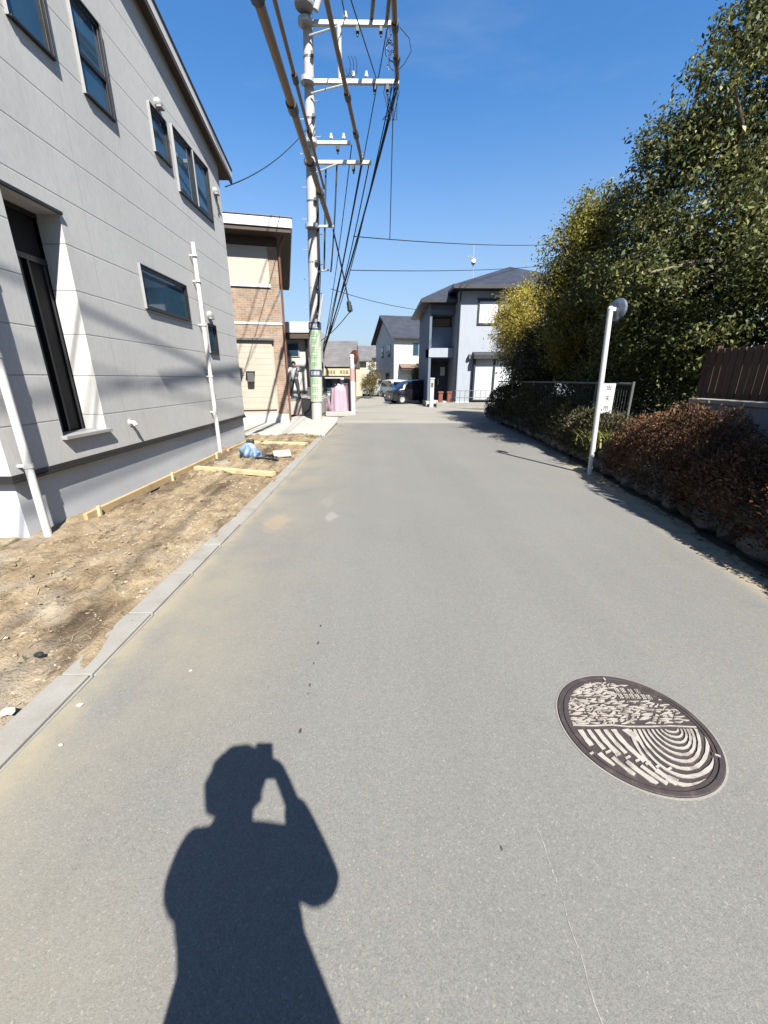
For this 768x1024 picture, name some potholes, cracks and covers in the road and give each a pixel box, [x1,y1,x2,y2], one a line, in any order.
manhole cover [556,675,729,801]
crack [534,822,603,1024]
